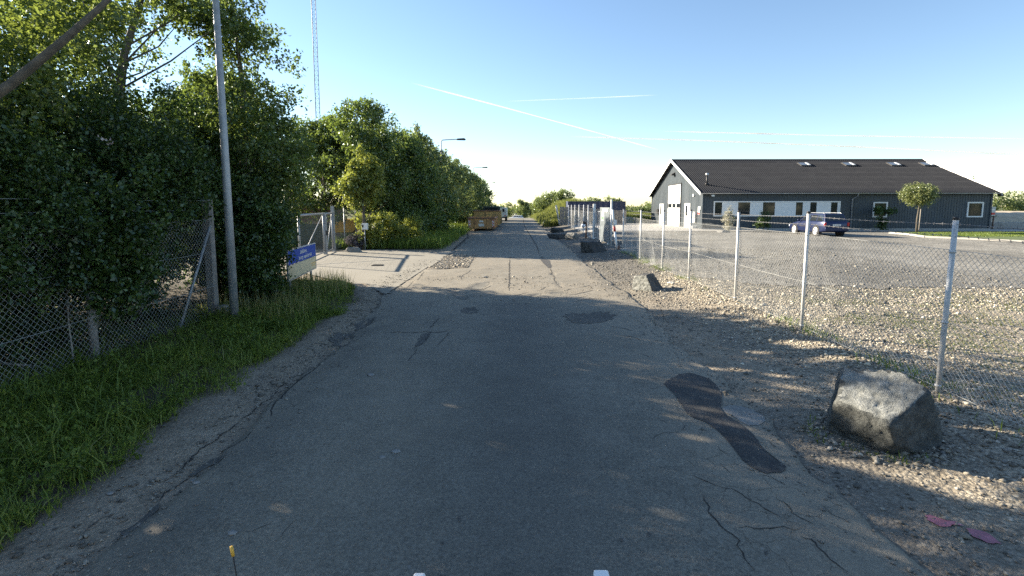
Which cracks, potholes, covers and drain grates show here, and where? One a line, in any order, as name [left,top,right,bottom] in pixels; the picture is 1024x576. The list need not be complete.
crack [684,447,848,572]
crack [160,348,360,500]
